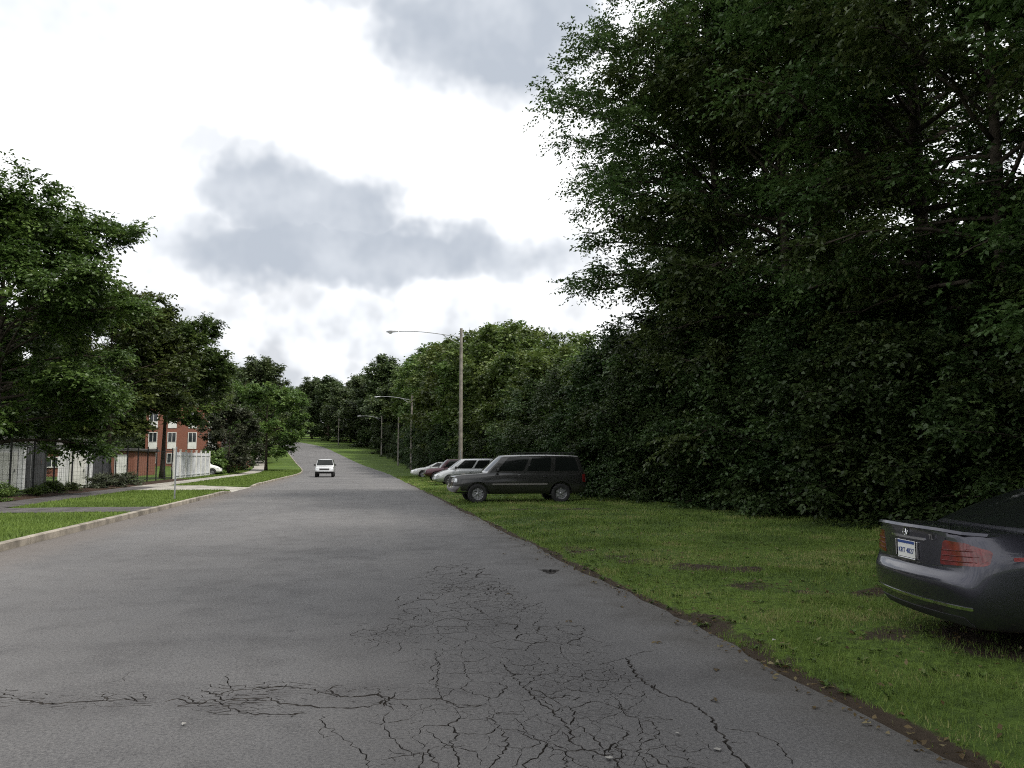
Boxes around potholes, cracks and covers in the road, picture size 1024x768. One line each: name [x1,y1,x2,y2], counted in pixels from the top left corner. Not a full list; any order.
crack [165,563,793,768]
